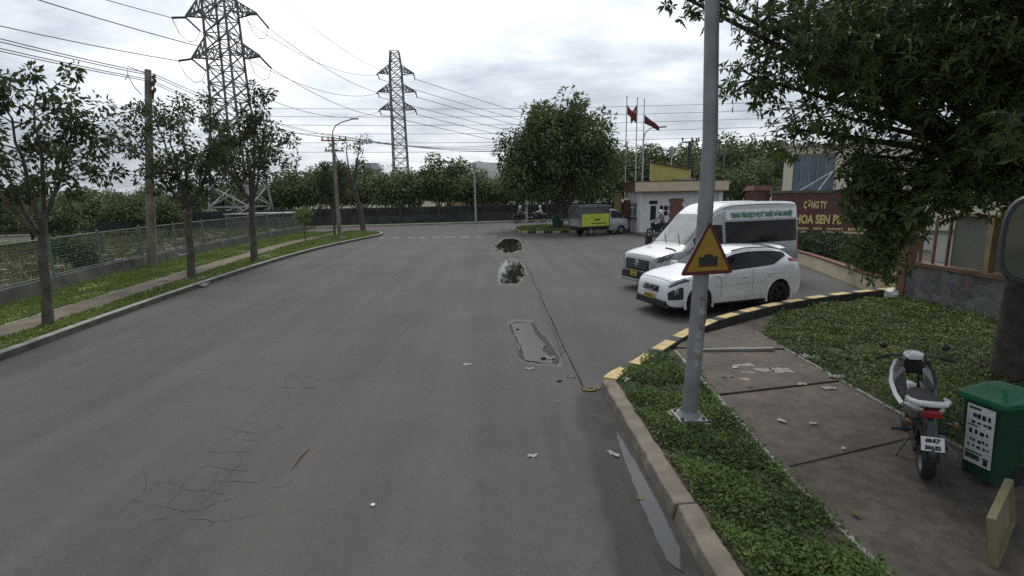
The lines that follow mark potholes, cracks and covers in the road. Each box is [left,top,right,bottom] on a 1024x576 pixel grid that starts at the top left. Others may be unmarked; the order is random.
pothole [506,319,563,367]
pothole [495,258,528,285]
crack [130,370,316,525]
pothole [493,237,524,253]
